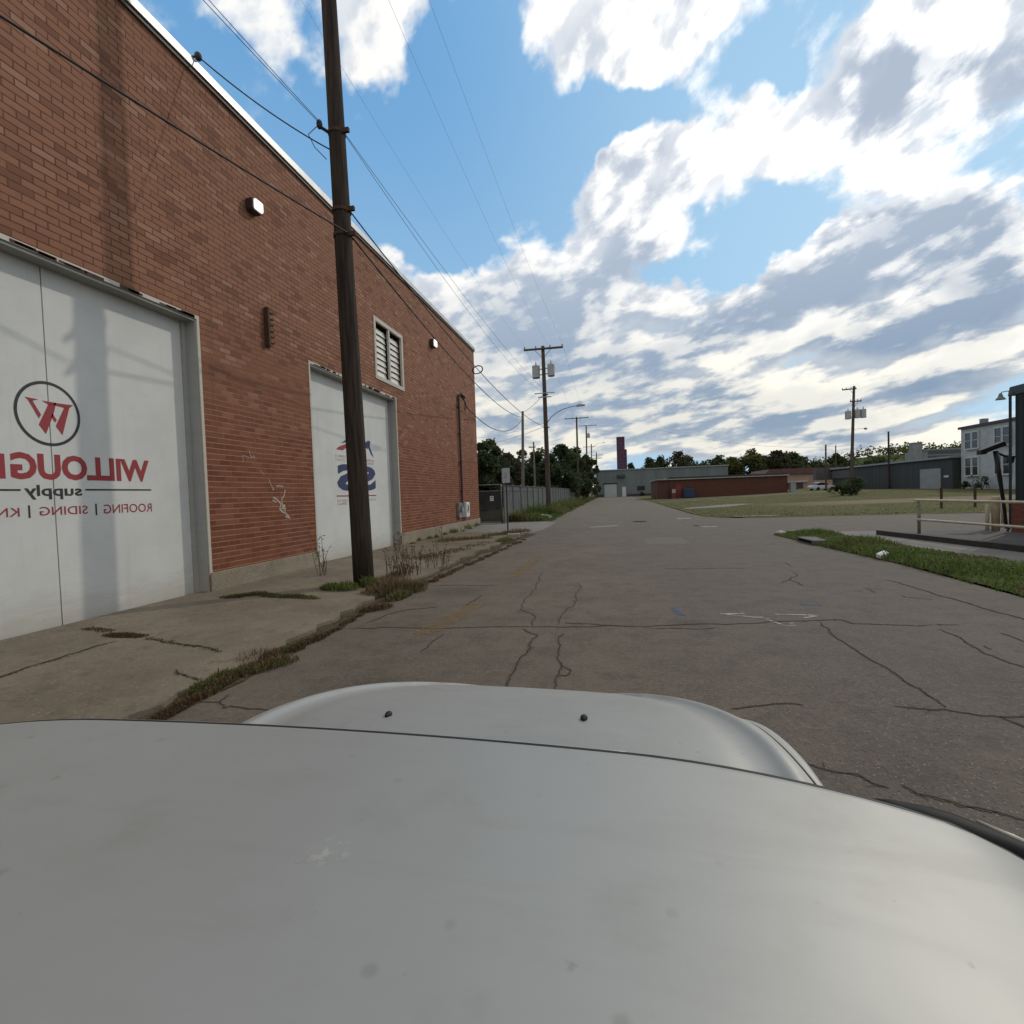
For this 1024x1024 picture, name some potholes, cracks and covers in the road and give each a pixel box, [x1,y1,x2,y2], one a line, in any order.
crack [365,572,1024,728]
crack [806,762,1024,820]
